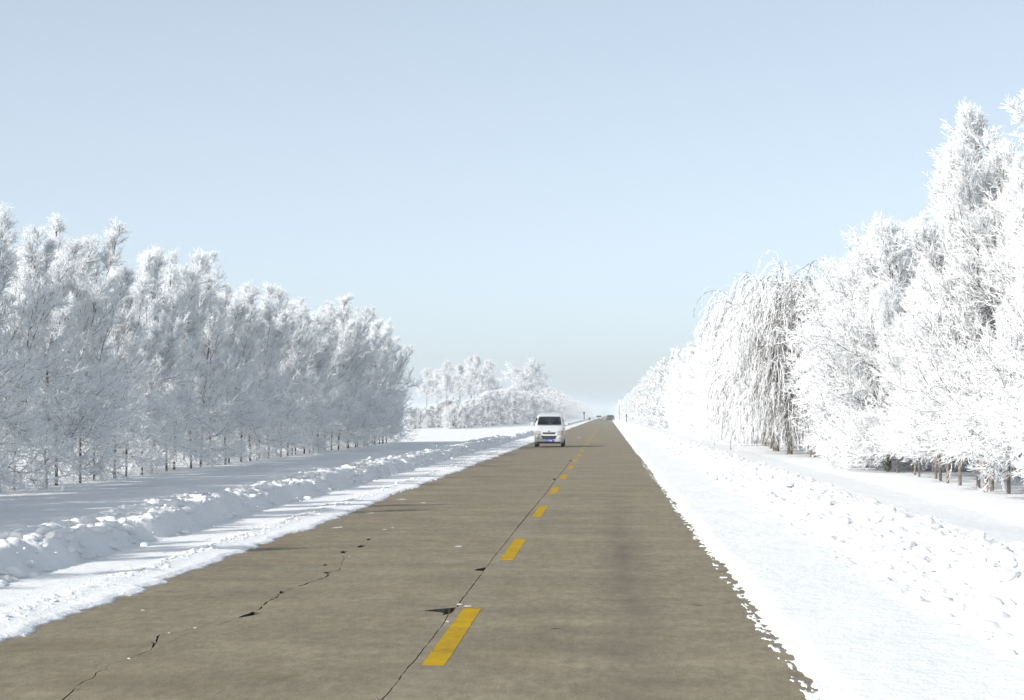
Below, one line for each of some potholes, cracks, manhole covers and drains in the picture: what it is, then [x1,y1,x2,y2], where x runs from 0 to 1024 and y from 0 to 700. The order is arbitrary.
crack [62,556,344,700]
pothole [426,607,456,615]
crack [381,463,569,700]
